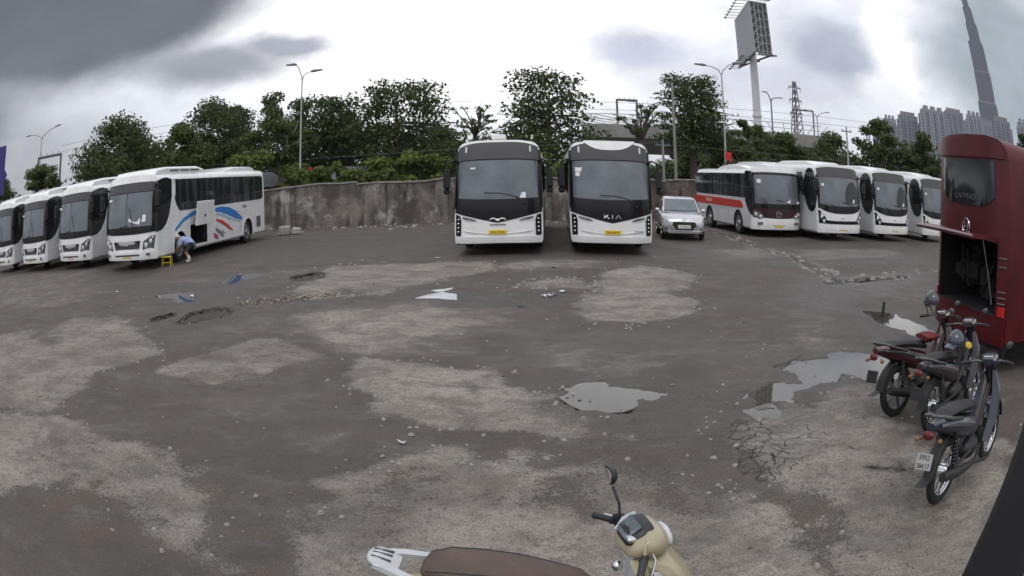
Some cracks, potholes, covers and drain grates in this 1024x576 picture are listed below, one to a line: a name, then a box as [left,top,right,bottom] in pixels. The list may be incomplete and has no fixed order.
pothole [150,313,177,322]
crack [728,418,828,481]
pothole [290,272,325,281]
pothole [175,307,234,325]
